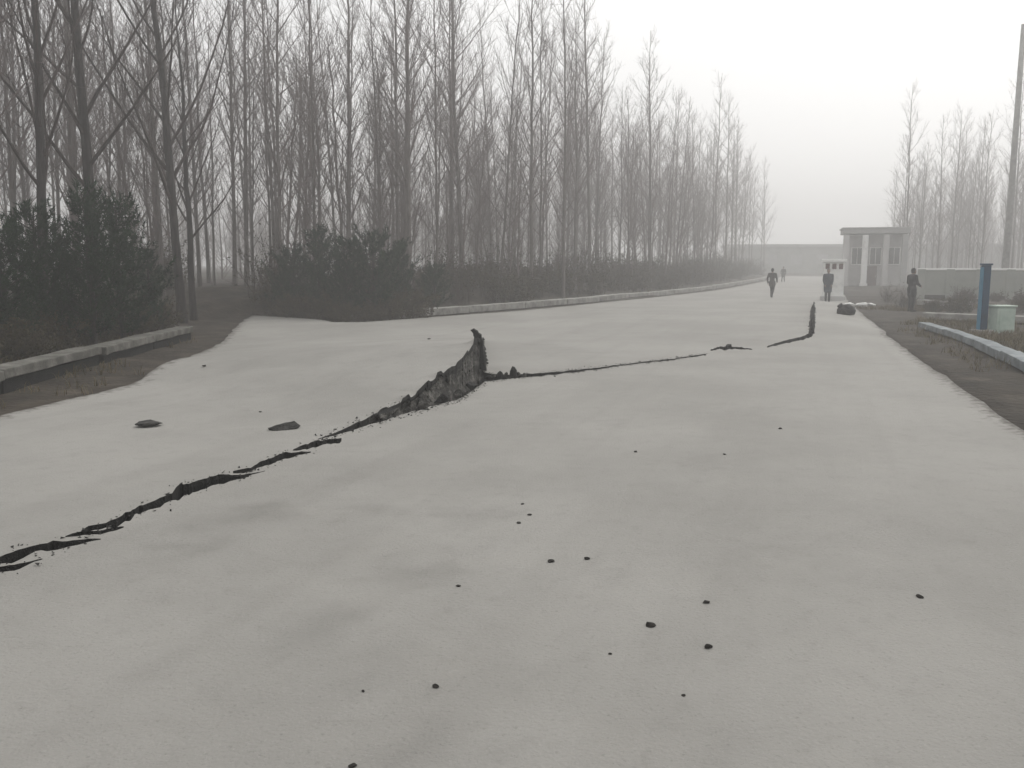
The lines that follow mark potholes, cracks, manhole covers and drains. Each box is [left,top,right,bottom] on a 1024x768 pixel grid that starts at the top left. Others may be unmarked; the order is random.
crack [0,302,816,572]
